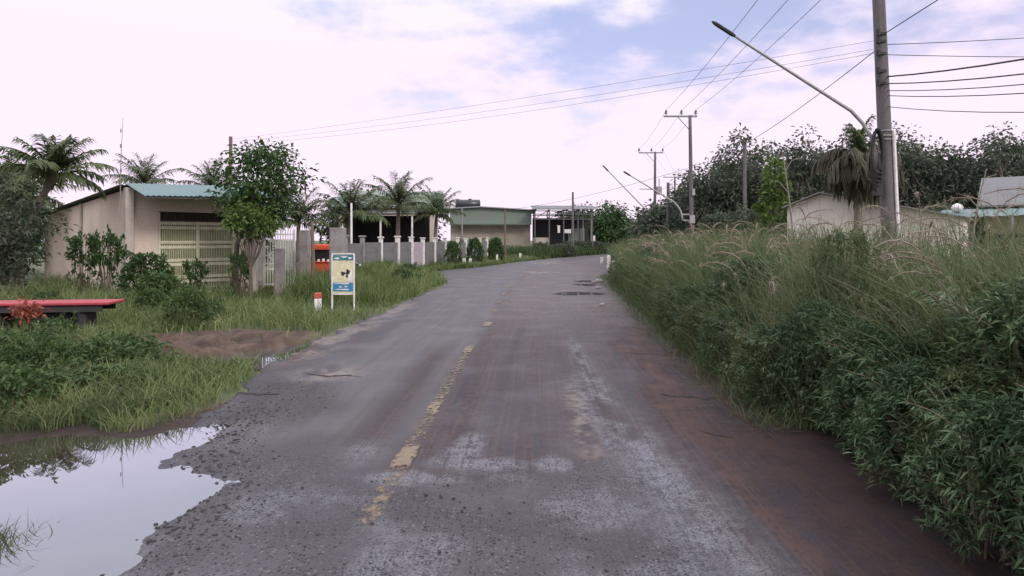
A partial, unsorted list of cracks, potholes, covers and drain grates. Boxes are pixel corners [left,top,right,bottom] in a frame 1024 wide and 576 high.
crack [235,373,360,395]
